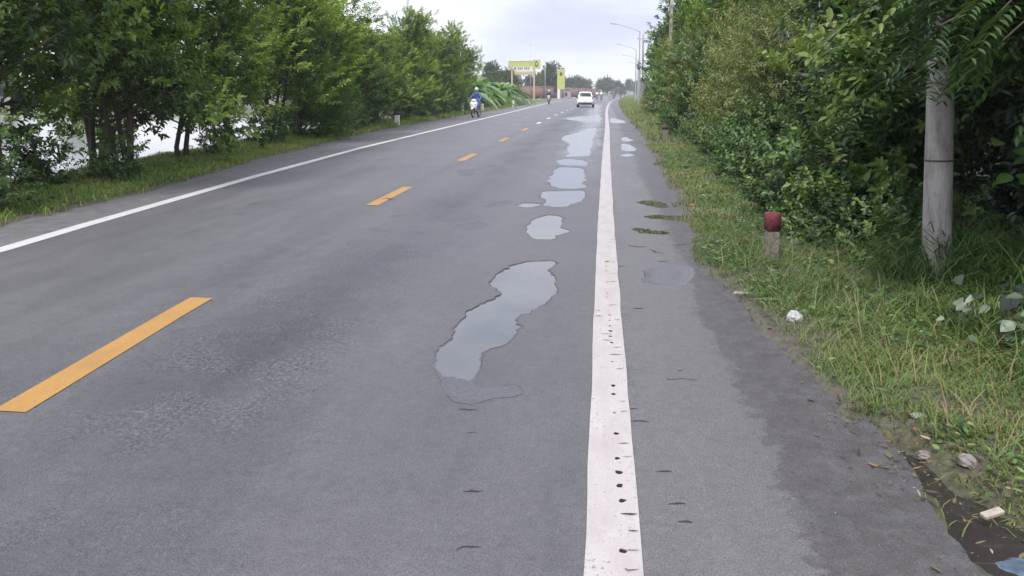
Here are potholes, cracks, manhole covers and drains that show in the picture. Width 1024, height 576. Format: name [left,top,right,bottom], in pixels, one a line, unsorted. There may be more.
pothole [631,227,670,235]
pothole [524,214,570,240]
pothole [546,167,589,189]
pothole [403,259,564,404]
pothole [561,128,597,157]
pothole [637,200,670,208]
pothole [538,190,588,207]
pothole [555,158,591,166]
